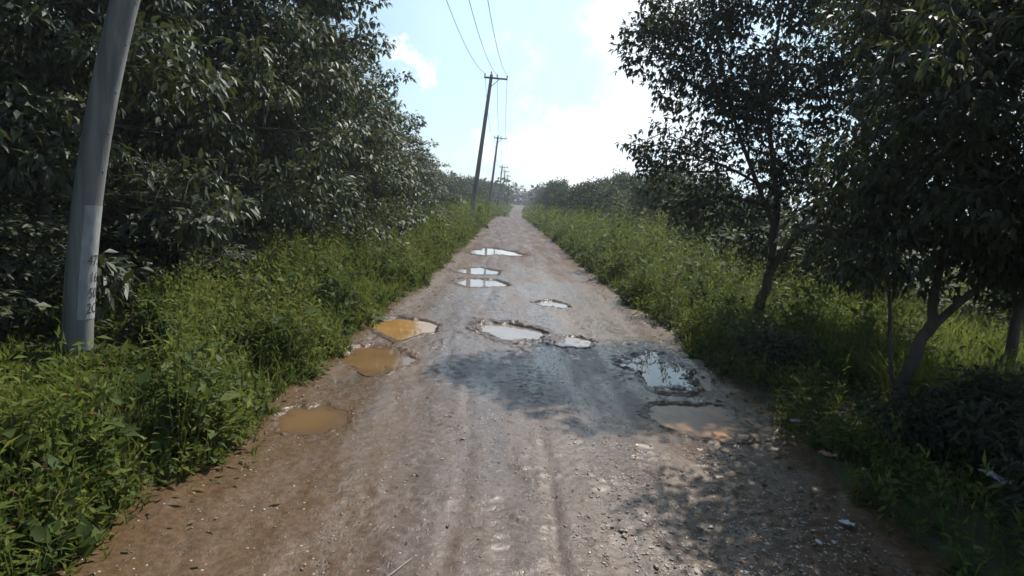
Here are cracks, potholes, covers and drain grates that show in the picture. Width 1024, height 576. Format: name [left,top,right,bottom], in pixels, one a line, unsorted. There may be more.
pothole [529,298,575,310]
pothole [458,246,530,257]
pothole [465,318,566,345]
pothole [359,315,446,343]
pothole [448,266,505,276]
pothole [540,334,598,350]
pothole [448,277,516,288]
pothole [268,401,355,438]
pothole [635,399,759,446]
pothole [609,347,705,398]
pothole [330,342,422,379]
